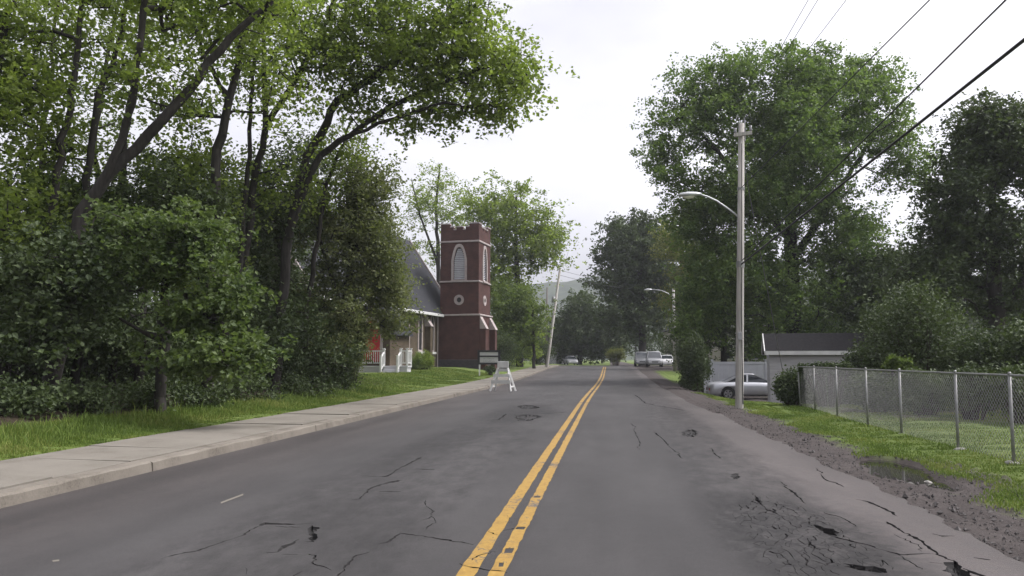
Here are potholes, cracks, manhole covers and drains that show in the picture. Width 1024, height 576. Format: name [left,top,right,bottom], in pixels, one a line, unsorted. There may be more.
pothole [843,563,887,573]
crack [732,468,989,576]
pothole [942,560,971,576]
crack [164,501,473,576]
pothole [304,525,320,542]
crack [355,457,434,500]
